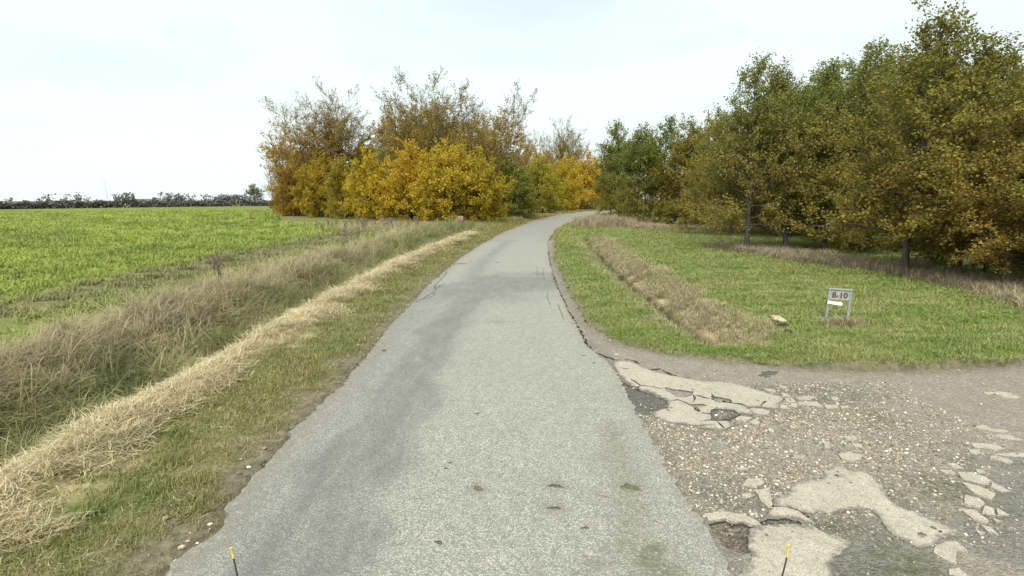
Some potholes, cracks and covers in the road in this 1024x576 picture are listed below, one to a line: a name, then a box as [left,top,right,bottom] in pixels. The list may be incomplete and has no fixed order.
crack [536,253,766,426]
crack [417,267,447,302]
pothole [708,521,751,554]
pothole [706,409,741,421]
pothole [621,381,667,415]
